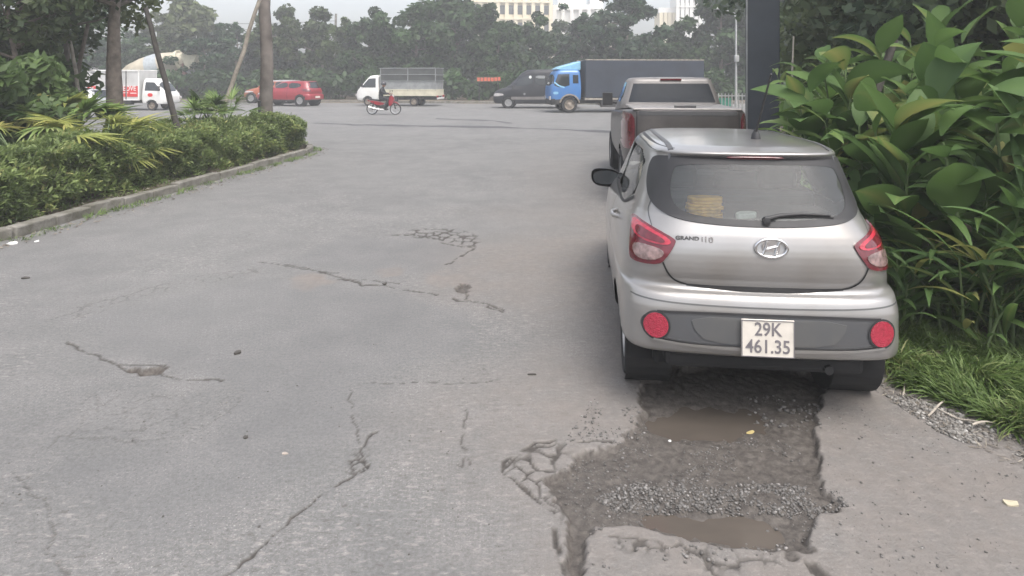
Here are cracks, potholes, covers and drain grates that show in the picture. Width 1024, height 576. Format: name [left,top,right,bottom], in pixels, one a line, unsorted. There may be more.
pothole [123,364,171,377]
crack [45,228,506,324]
crack [46,341,246,448]
crack [456,408,473,468]
crack [11,471,74,576]
pothole [539,365,846,576]
crack [219,430,379,576]
